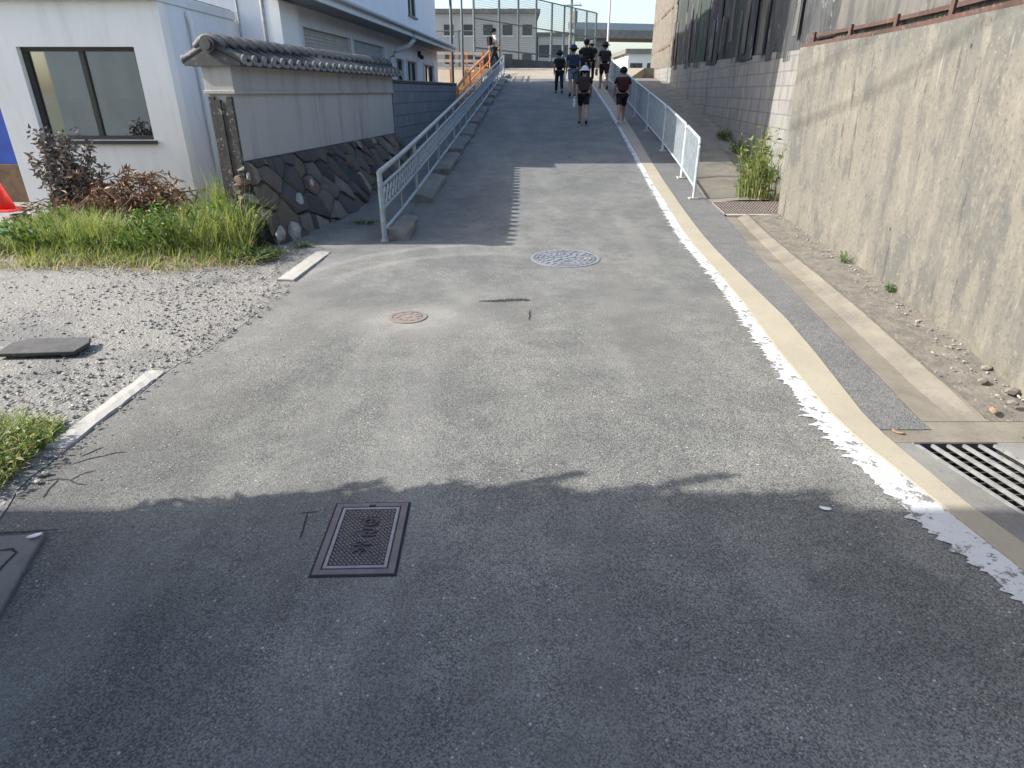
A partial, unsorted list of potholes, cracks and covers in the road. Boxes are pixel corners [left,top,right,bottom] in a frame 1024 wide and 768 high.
crack [482,298,531,320]
drain grate [912,442,1024,516]
manhole cover [530,249,600,268]
drain grate [712,202,779,215]
manhole cover [388,310,427,324]
crack [43,447,122,497]
manhole cover [308,502,411,578]
